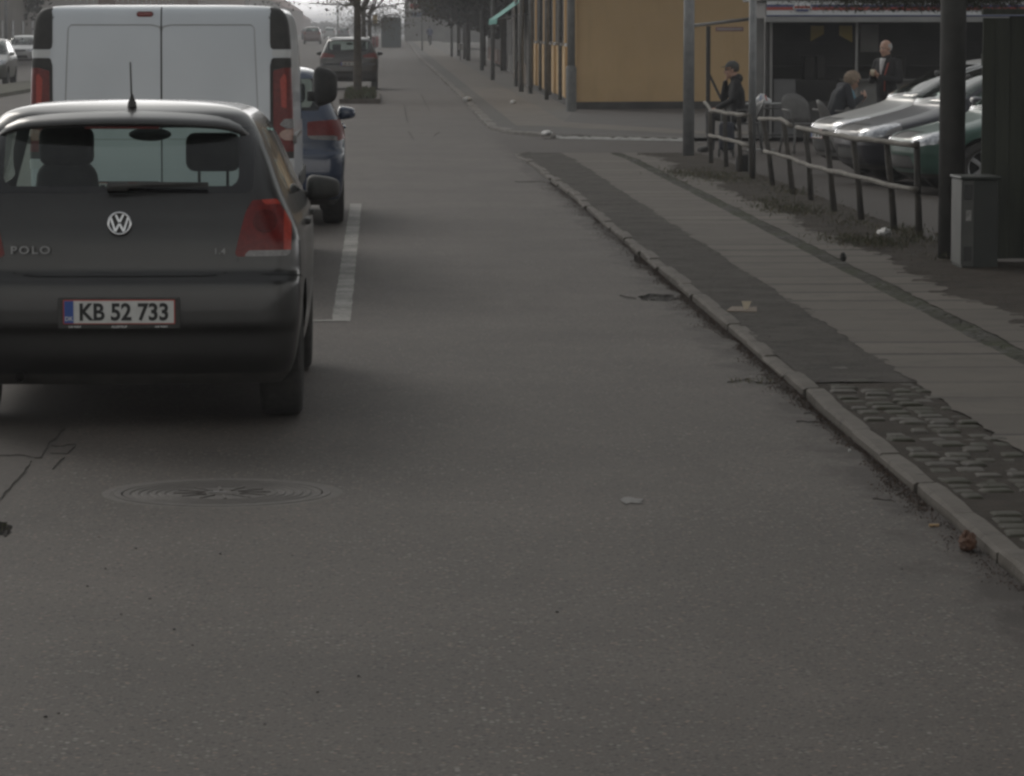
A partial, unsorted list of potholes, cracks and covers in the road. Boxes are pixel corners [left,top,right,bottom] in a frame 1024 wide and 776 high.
pothole [0,522,13,537]
crack [0,428,76,501]
manhole cover [102,478,342,508]
pothole [637,293,677,302]
crack [727,378,777,386]
